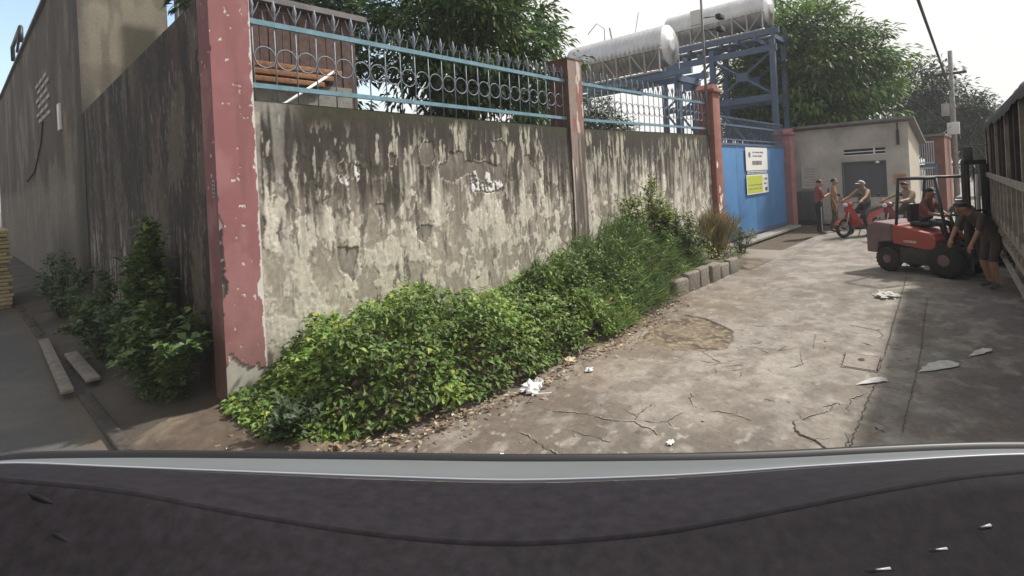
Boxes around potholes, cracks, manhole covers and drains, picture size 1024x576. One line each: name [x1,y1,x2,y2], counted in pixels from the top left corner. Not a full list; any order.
crack [792,394,863,447]
crack [552,392,747,442]
crack [701,323,817,376]
manhole cover [840,352,883,373]
